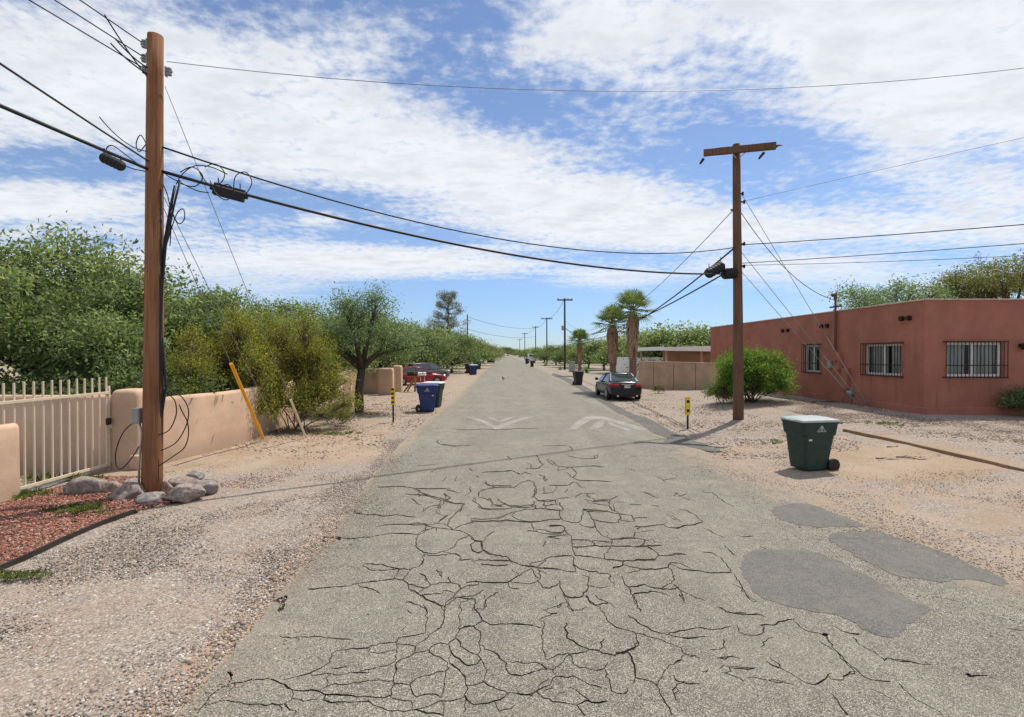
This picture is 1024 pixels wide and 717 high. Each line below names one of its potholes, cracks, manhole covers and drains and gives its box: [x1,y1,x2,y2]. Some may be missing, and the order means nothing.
crack [197,455,943,716]
